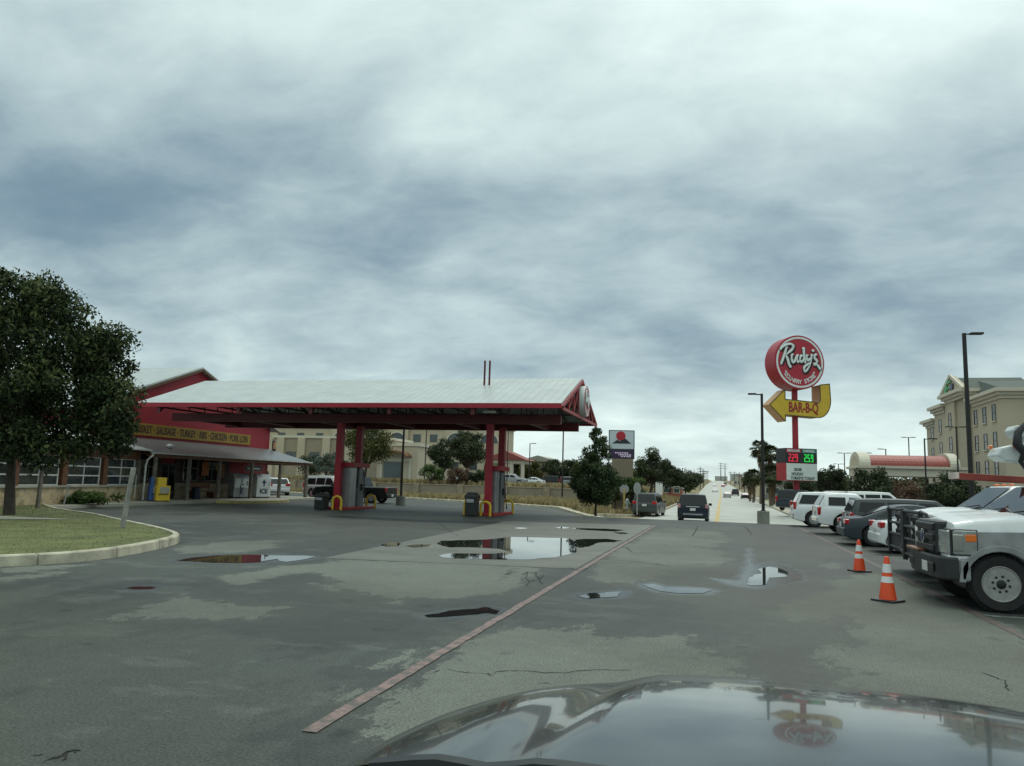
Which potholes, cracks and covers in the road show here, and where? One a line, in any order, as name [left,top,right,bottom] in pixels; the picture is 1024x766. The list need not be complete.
crack [31,749,81,761]
crack [433,669,610,684]
